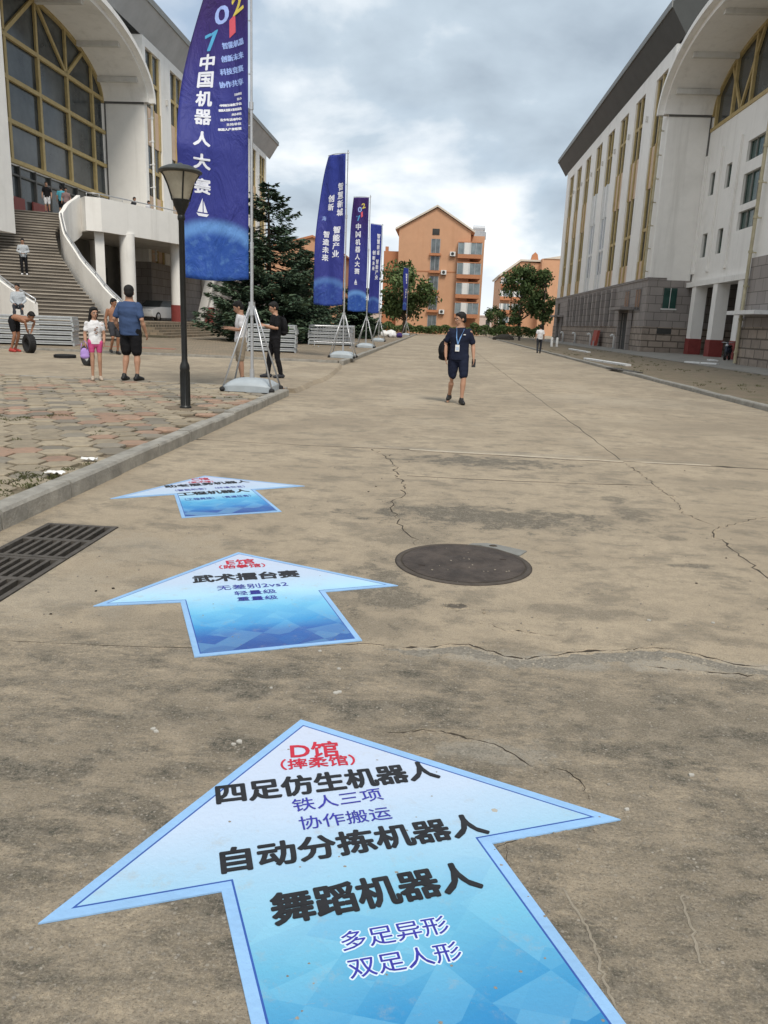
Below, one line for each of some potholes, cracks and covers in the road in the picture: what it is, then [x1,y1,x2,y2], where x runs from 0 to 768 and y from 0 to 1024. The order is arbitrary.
crack [360,447,420,545]
drain grate [0,555,66,602]
drain grate [0,523,118,560]
crack [625,463,768,581]
crack [378,623,768,681]
crack [679,894,702,964]
crack [382,728,592,799]
manhole cover [395,544,532,586]
crack [562,888,618,1009]
